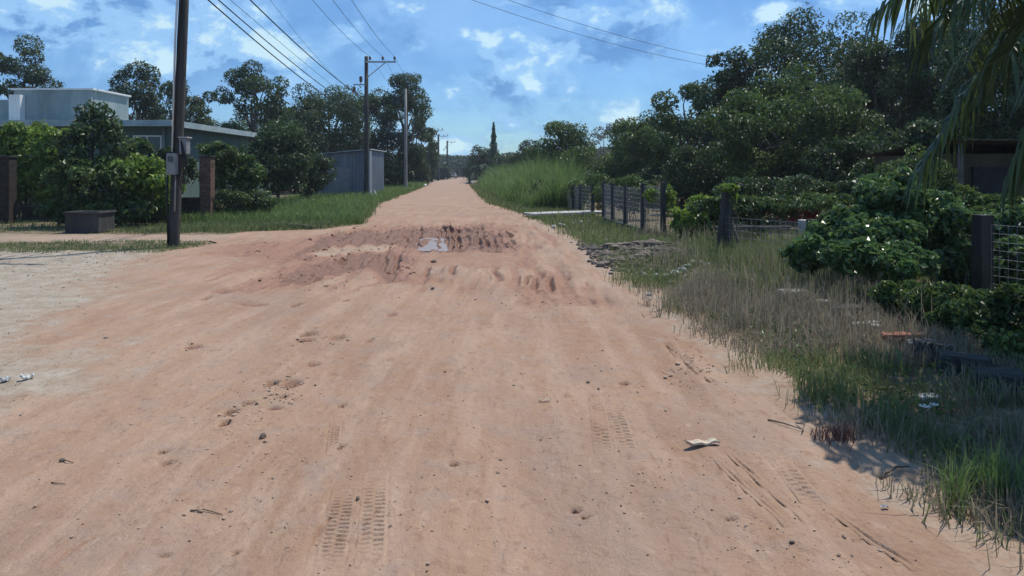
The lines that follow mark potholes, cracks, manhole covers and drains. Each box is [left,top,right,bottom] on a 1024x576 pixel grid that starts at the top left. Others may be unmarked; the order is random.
pothole [306,245,393,257]
pothole [409,250,519,271]
pothole [413,233,448,252]
